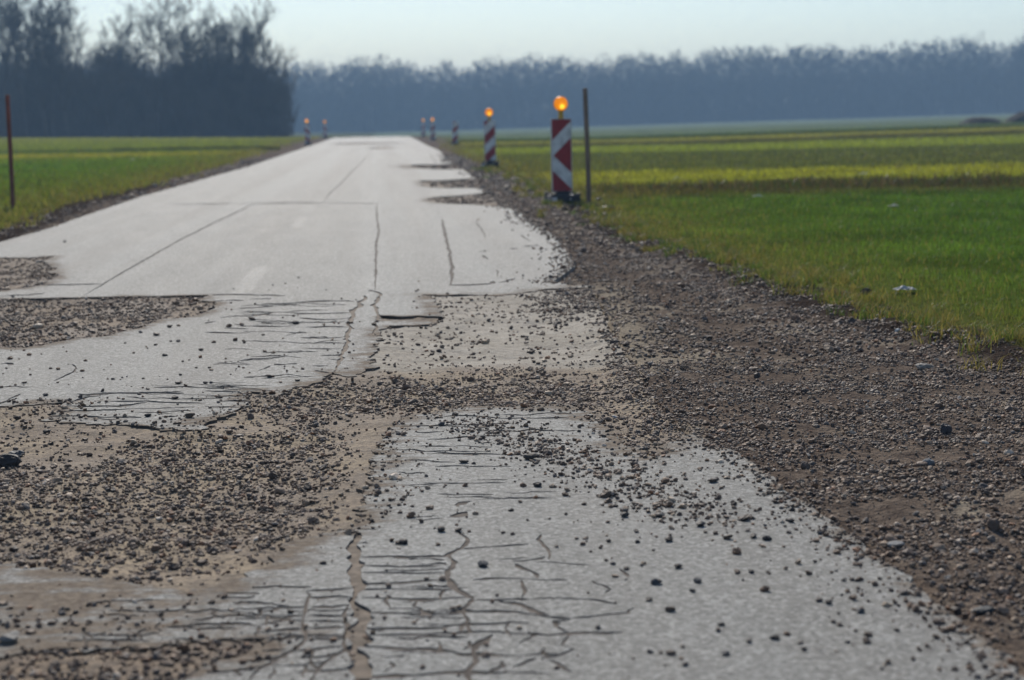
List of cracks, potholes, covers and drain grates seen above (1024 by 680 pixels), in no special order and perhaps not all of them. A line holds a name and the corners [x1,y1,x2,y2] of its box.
pothole [427,193,498,206]
crack [69,412,634,680]
pothole [0,256,59,289]
crack [0,204,382,420]
pothole [0,287,684,591]
pothole [420,178,478,188]
crack [441,220,553,286]
